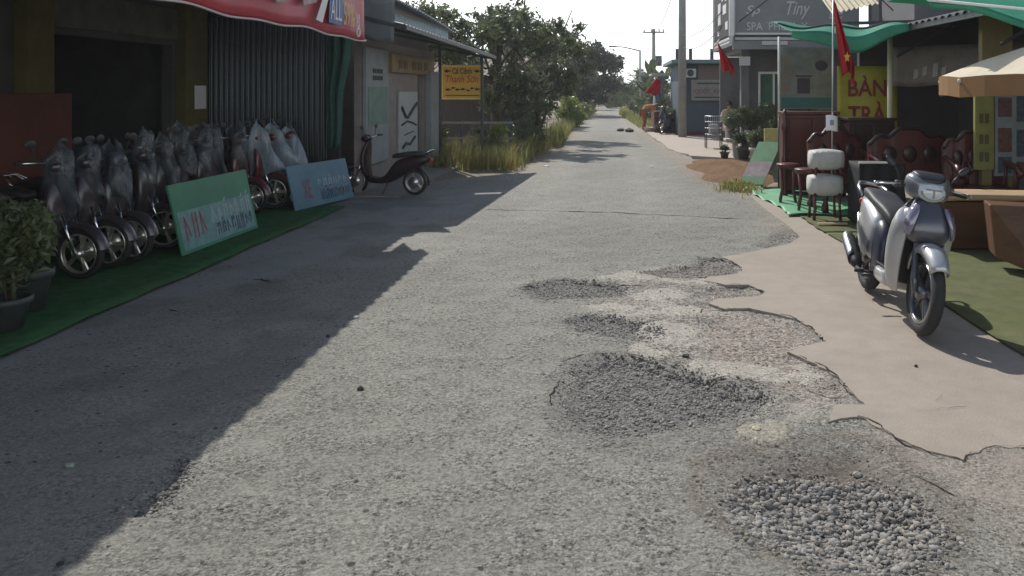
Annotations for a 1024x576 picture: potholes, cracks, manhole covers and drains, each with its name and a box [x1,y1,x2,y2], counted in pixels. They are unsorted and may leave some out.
pothole [545,350,791,445]
pothole [504,278,641,302]
pothole [557,310,673,342]
crack [721,310,977,460]
pothole [623,256,741,280]
pothole [691,435,976,576]
